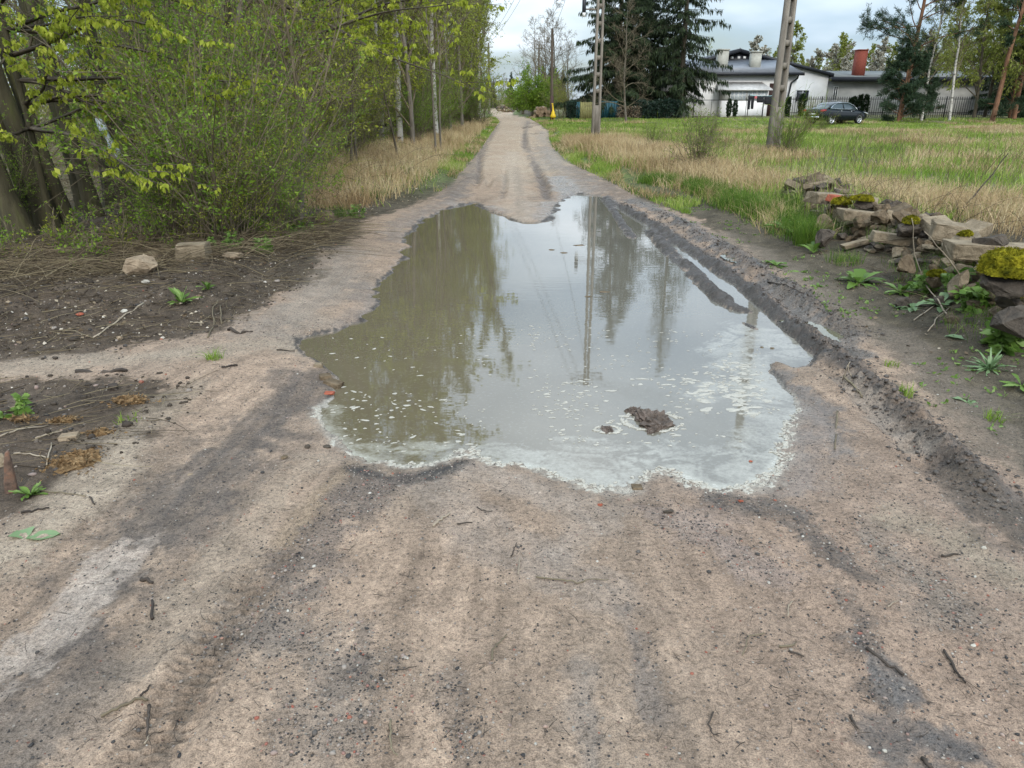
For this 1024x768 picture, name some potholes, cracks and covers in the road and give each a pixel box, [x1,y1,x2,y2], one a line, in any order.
pothole [281,192,834,498]
